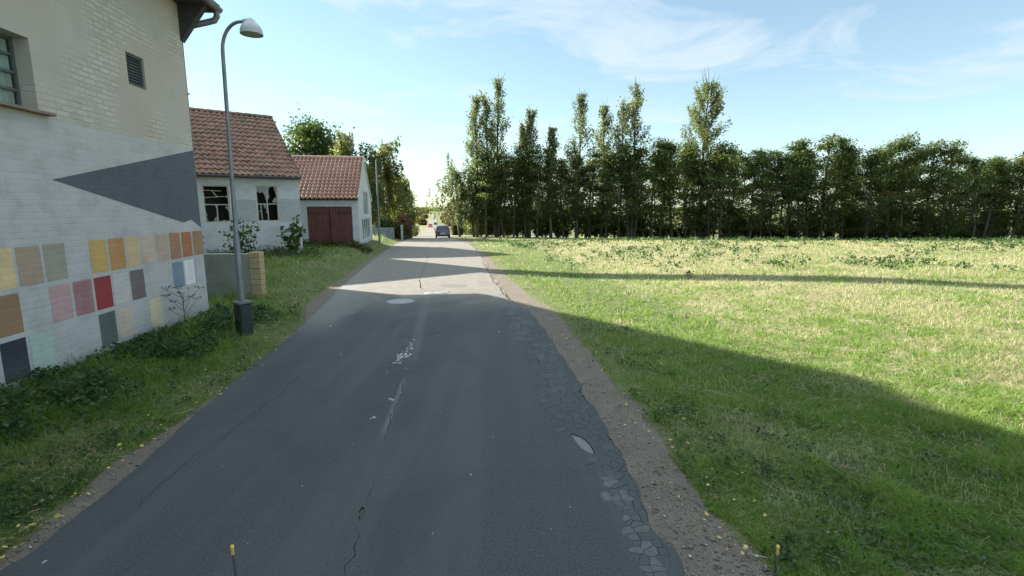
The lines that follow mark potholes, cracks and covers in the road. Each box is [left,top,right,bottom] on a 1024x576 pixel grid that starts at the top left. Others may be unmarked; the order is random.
pothole [571,433,595,454]
crack [472,263,672,576]
